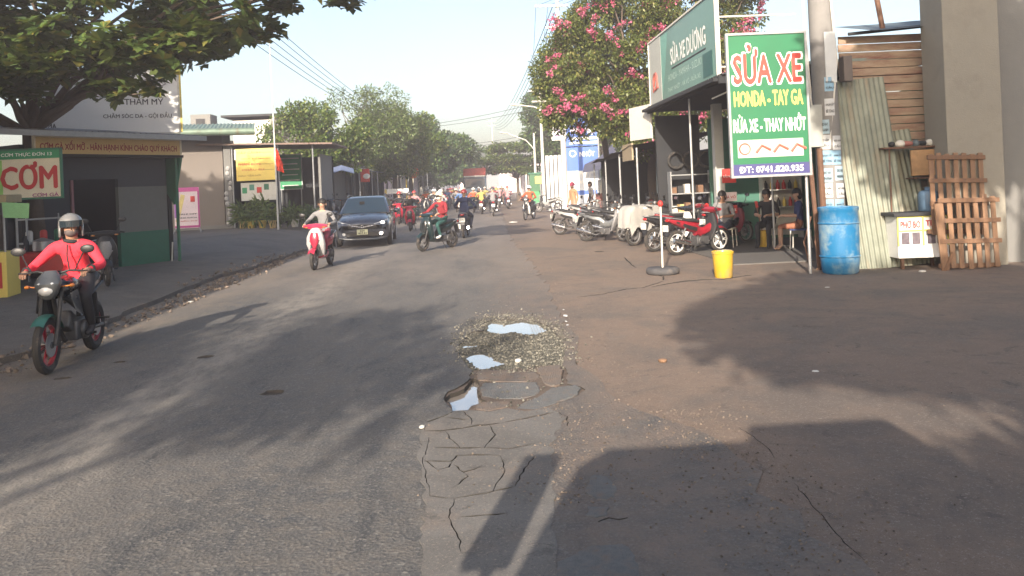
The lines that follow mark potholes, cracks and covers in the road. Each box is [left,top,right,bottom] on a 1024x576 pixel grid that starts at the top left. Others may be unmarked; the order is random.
pothole [444,319,585,412]
crack [794,483,861,557]
crack [422,410,569,551]
crack [582,275,750,297]
